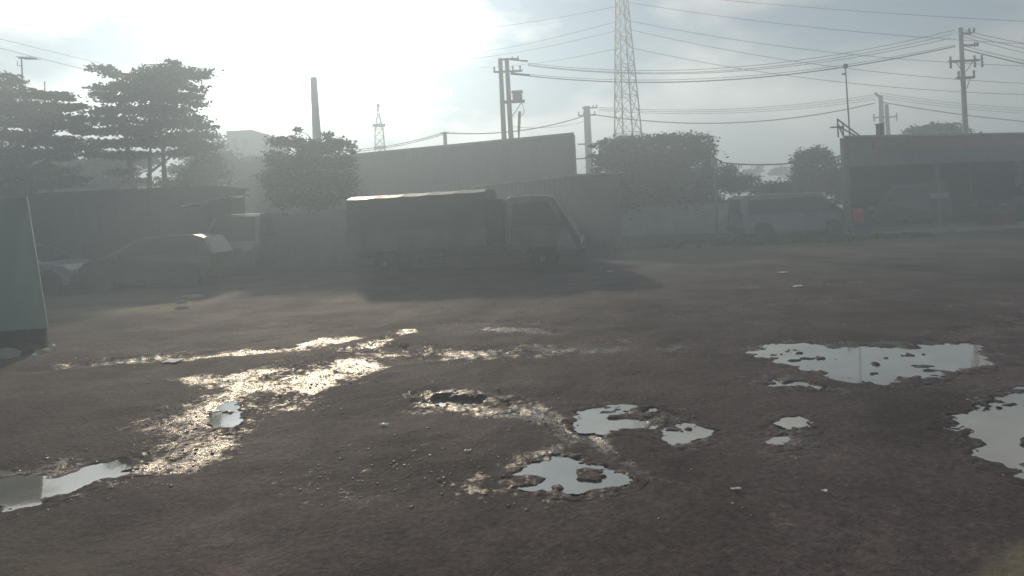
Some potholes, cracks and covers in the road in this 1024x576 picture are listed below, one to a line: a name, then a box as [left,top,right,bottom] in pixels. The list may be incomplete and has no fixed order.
pothole [731,338,1022,389]
pothole [497,447,649,502]
pothole [915,383,1024,486]
pothole [757,411,831,437]
pothole [399,388,537,417]
pothole [643,417,733,451]
pothole [559,400,686,441]
pothole [0,453,164,522]
pothole [746,374,840,394]
pothole [193,396,258,436]
pothole [748,431,811,453]
